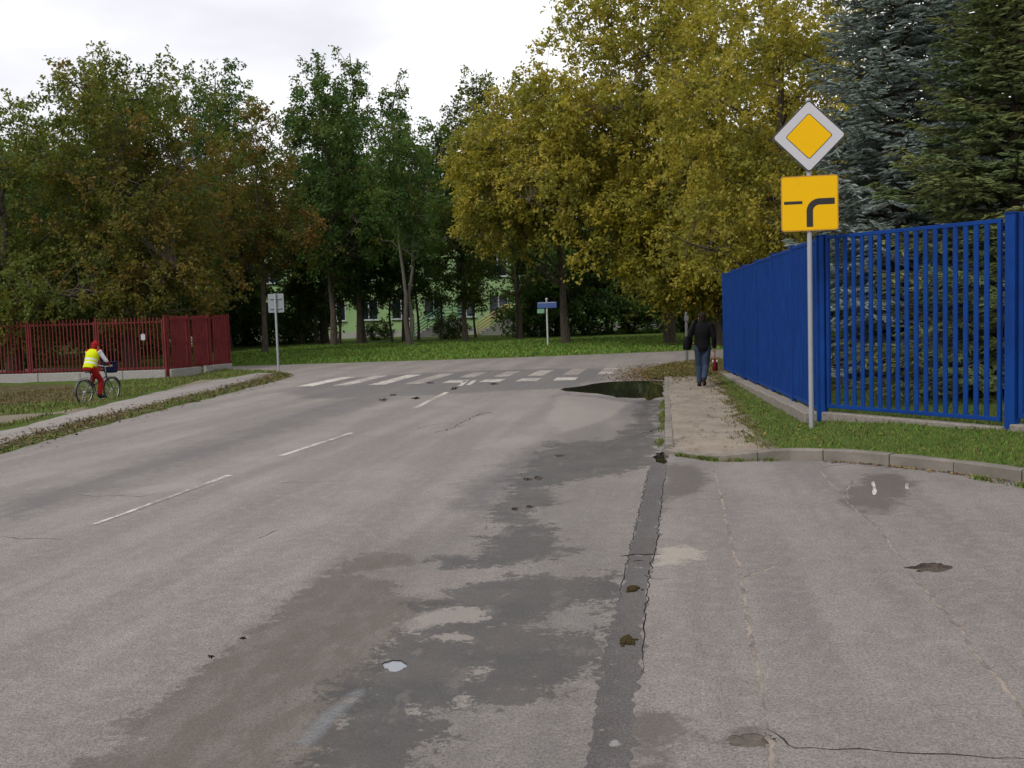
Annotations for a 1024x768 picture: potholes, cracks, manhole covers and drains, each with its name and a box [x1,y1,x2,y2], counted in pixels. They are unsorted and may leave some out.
pothole [561,381,665,400]
pothole [382,660,407,672]
pothole [726,733,777,748]
pothole [905,563,953,572]
